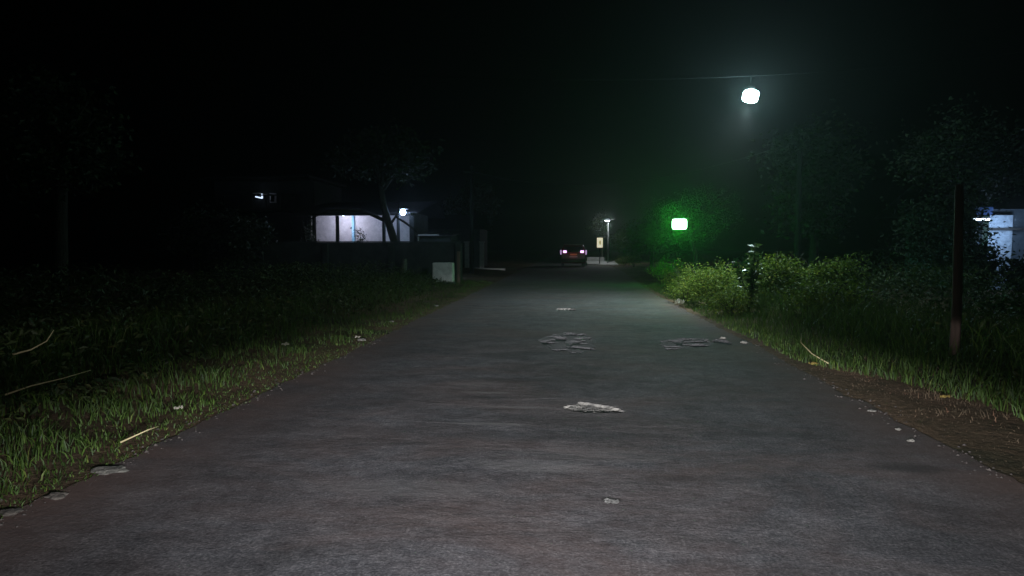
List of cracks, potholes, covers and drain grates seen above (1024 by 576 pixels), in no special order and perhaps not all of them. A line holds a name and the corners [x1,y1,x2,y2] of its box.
pothole [659,338,714,350]
pothole [538,332,596,354]
pothole [564,402,625,413]
